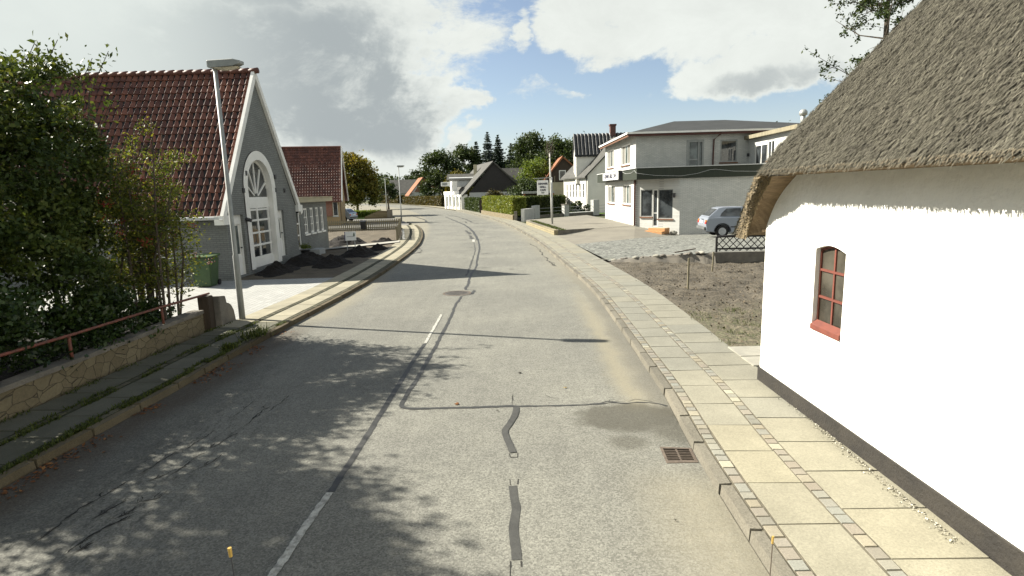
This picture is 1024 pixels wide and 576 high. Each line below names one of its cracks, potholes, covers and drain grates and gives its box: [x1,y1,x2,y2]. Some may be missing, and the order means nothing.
crack [23,395,289,554]
drain grate [660,447,699,463]
